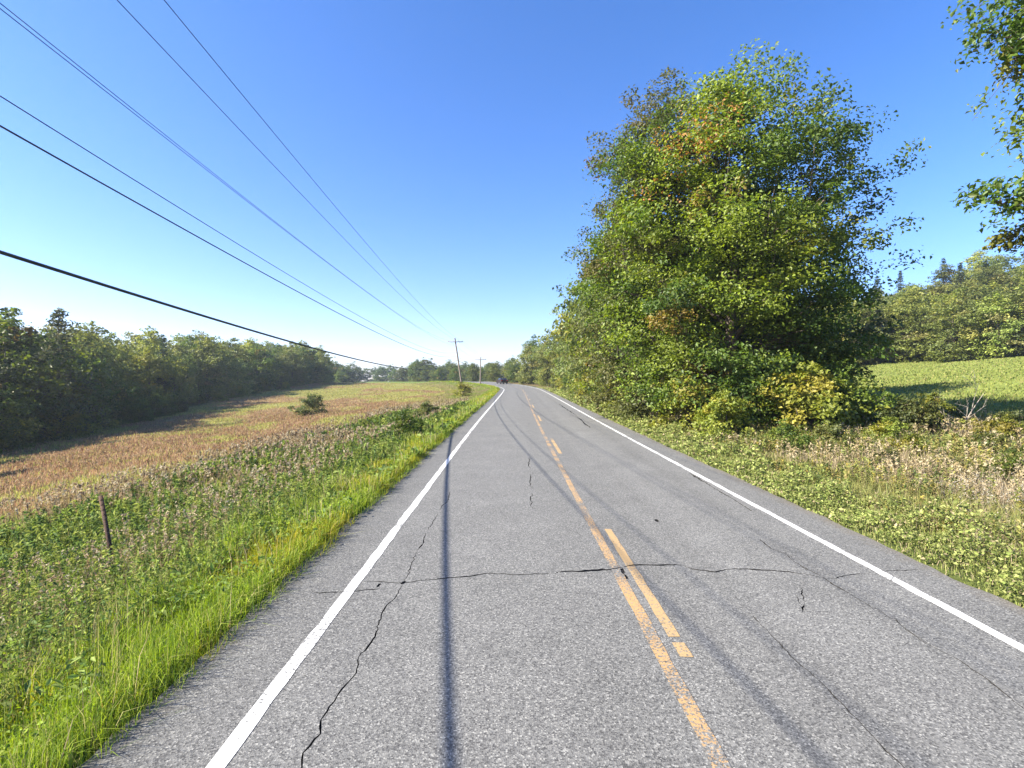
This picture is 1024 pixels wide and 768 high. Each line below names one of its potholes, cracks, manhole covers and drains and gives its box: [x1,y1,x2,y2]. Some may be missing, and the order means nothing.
crack [301,491,1024,768]
